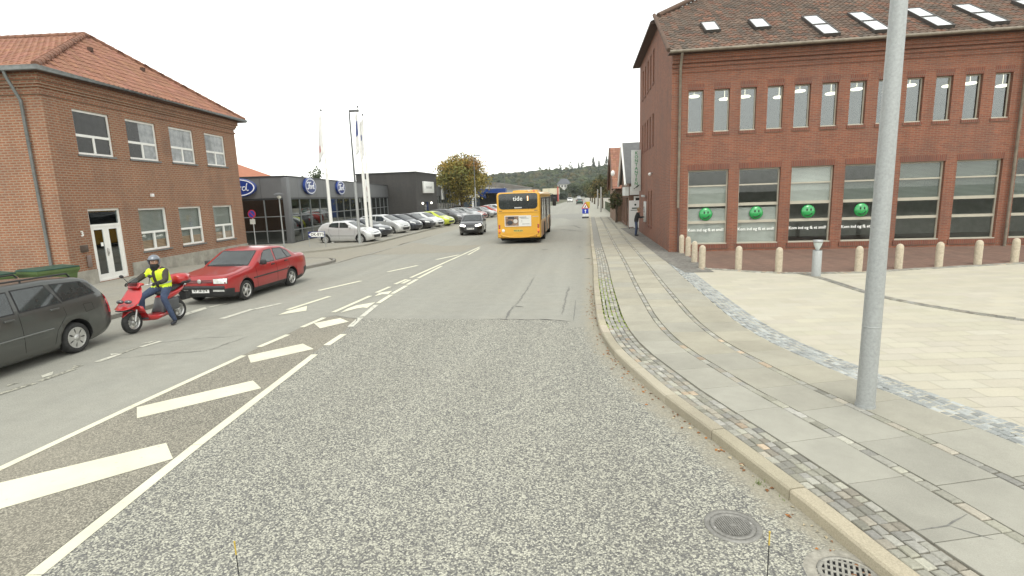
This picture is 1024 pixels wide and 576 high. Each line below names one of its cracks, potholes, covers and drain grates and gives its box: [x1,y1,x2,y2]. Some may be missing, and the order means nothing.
drain grate [803,549,879,576]
crack [506,278,534,318]
crack [921,514,994,540]
manhole cover [704,509,763,544]
